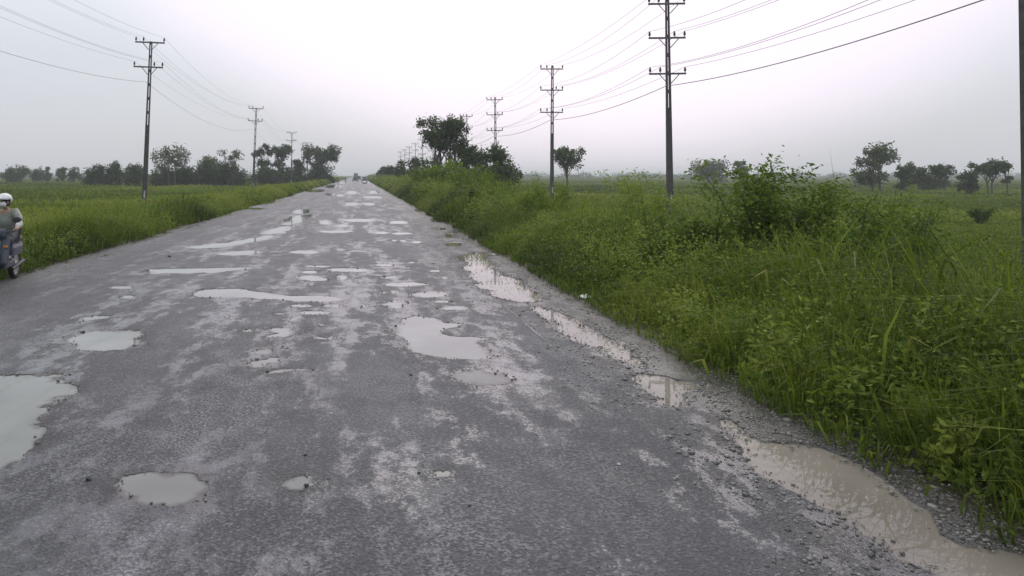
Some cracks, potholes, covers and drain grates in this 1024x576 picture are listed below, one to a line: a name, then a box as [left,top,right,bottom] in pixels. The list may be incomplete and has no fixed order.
pothole [280,473,315,490]
pothole [389,315,497,360]
pothole [246,357,281,368]
pothole [449,369,514,388]
pothole [66,328,147,351]
pothole [193,288,346,302]
pothole [112,471,210,508]
pothole [0,373,79,470]
pothole [180,235,277,249]
